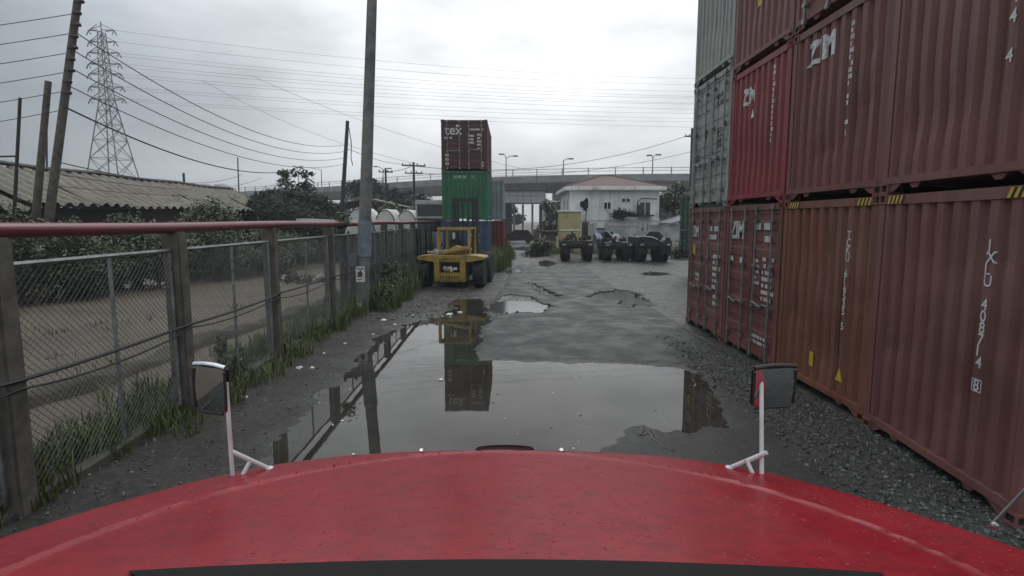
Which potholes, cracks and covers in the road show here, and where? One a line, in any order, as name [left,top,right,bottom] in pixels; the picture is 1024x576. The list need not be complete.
pothole [527,282,567,297]
pothole [484,293,558,316]
pothole [581,289,657,307]
